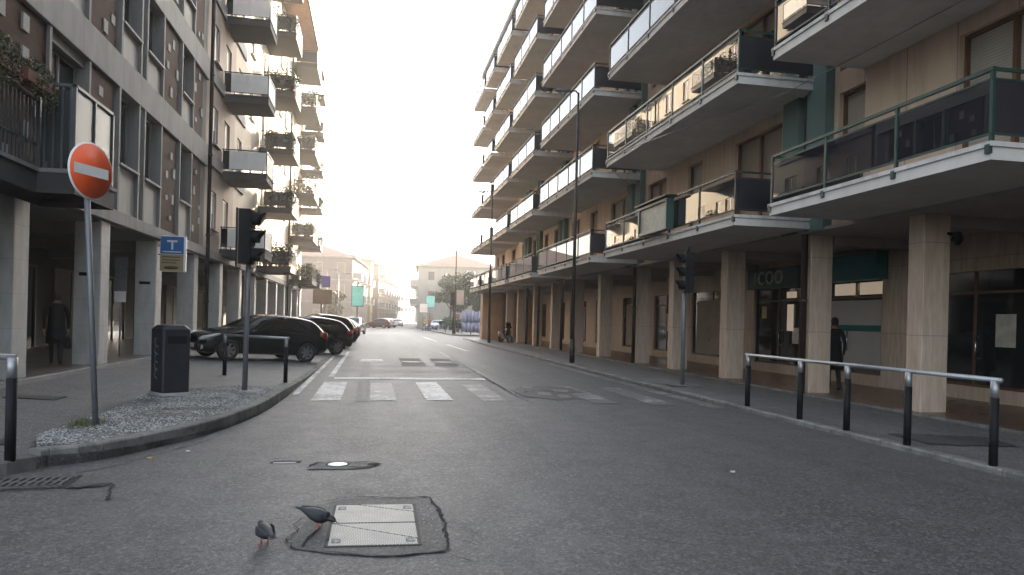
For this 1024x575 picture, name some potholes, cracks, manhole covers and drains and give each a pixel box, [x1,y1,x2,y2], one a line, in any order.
manhole cover [324,504,422,548]
drain grate [0,475,83,491]
